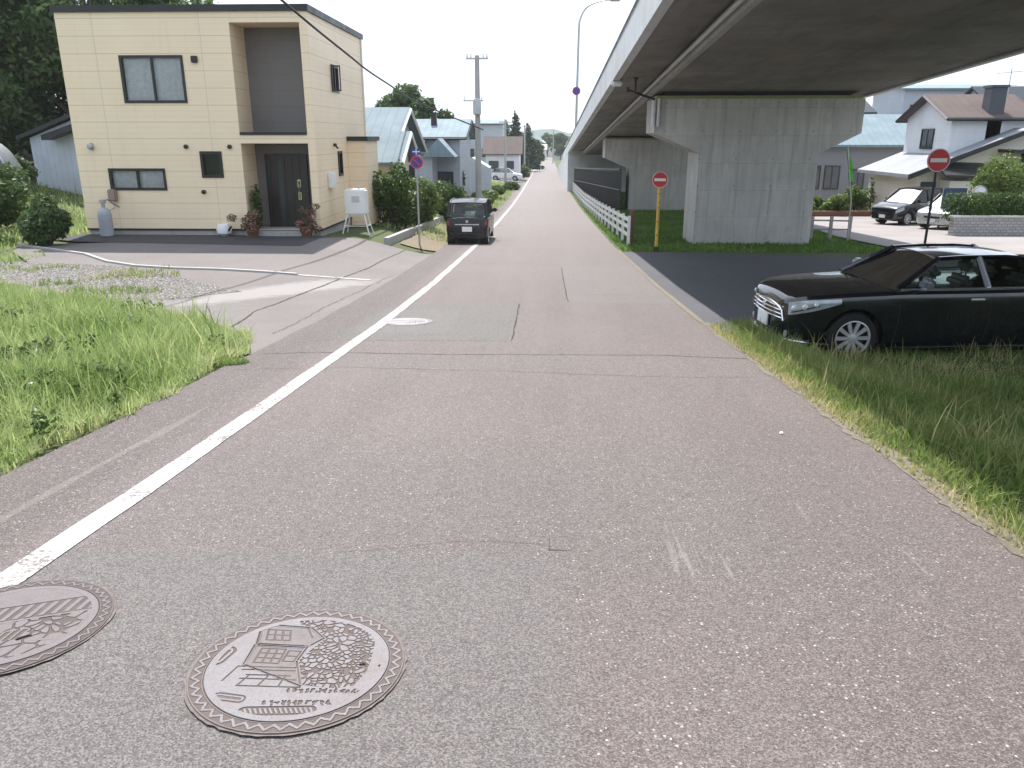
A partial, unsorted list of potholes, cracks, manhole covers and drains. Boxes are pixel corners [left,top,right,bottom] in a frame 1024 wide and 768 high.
crack [230,250,404,333]
manhole cover [184,610,407,736]
manhole cover [387,317,433,325]
manhole cover [0,580,116,675]
crack [235,304,750,378]
